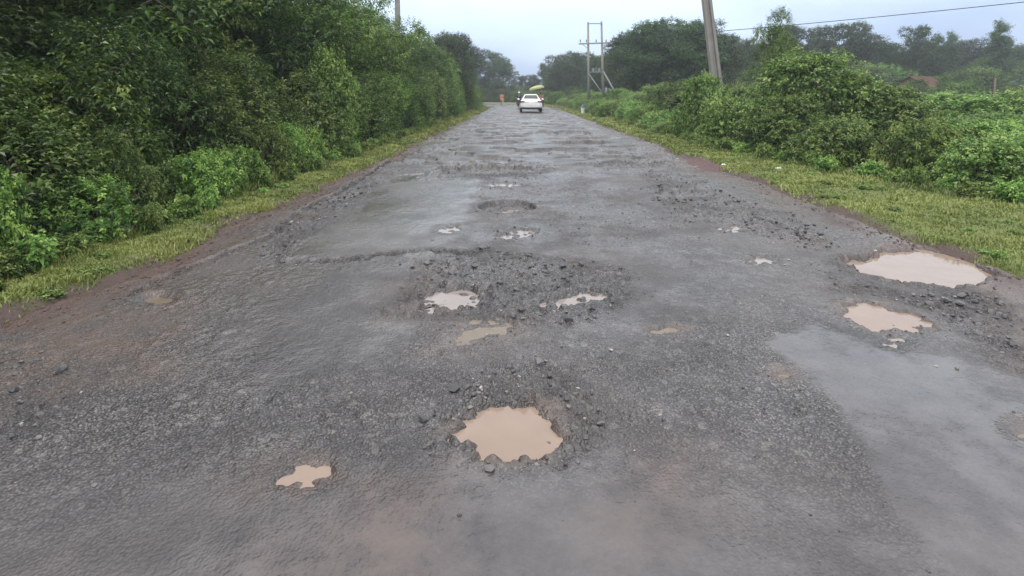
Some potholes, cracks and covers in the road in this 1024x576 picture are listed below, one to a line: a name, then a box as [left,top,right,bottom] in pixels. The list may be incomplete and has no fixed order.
pothole [822,296,953,337]
pothole [121,287,193,307]
pothole [264,452,349,495]
pothole [637,321,693,337]
pothole [472,198,542,216]
pothole [486,225,546,242]
pothole [428,391,588,471]
pothole [432,162,538,176]
